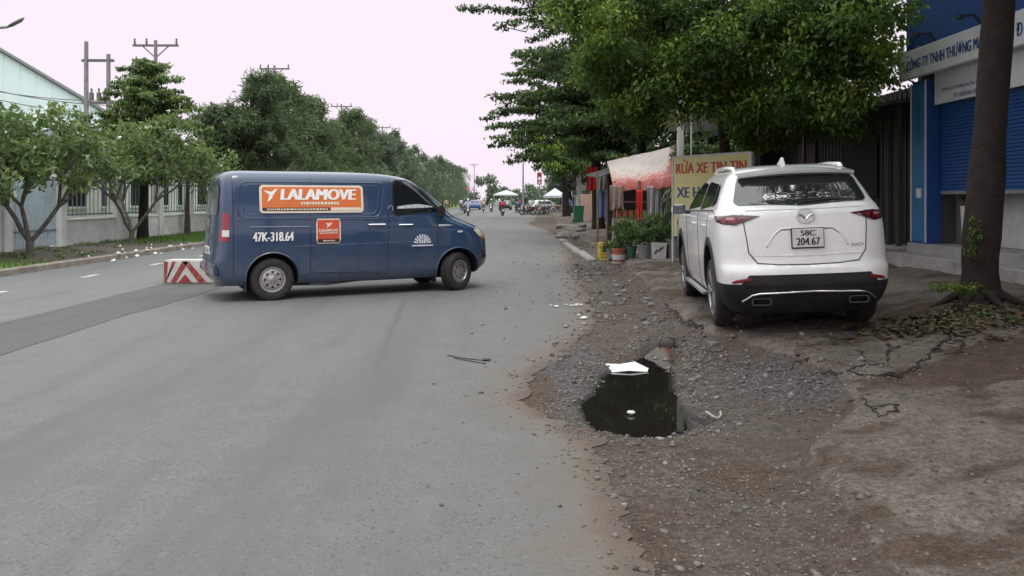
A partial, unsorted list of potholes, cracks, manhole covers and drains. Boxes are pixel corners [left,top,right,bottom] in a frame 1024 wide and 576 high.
pothole [557,336,731,440]
crack [770,324,965,377]
crack [860,396,900,417]
crack [664,303,704,330]
